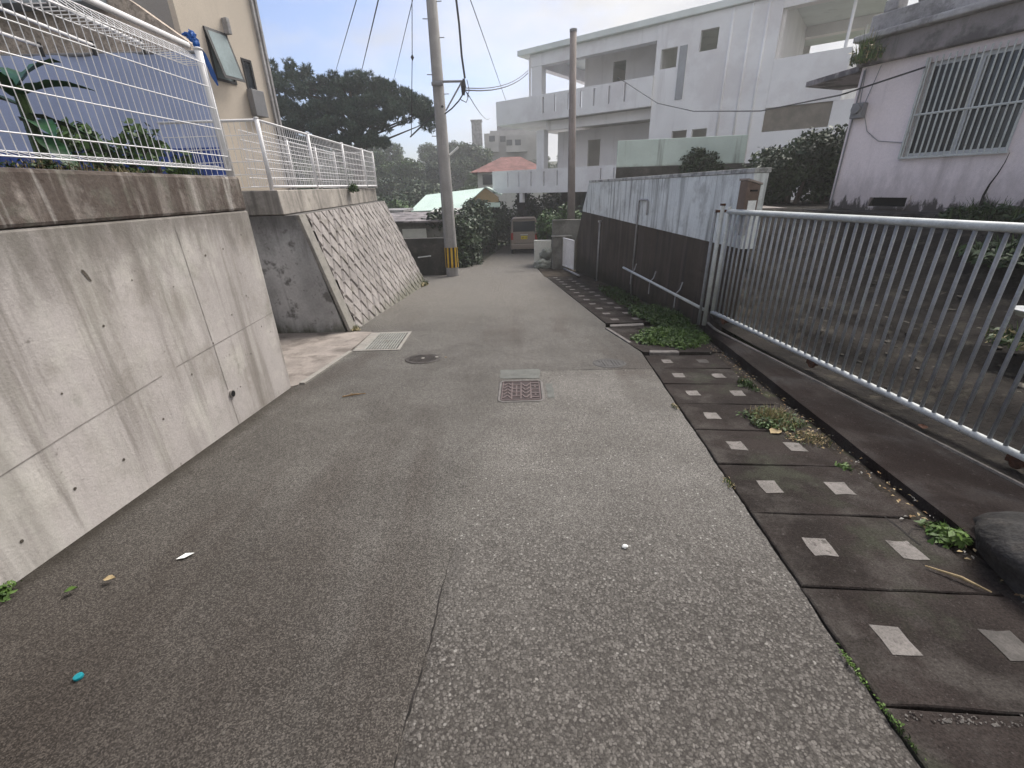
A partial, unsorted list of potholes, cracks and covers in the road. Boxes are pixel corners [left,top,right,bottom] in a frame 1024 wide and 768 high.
manhole cover [497,380,545,403]
manhole cover [593,359,626,368]
manhole cover [405,354,441,364]
drain grate [353,331,412,352]
